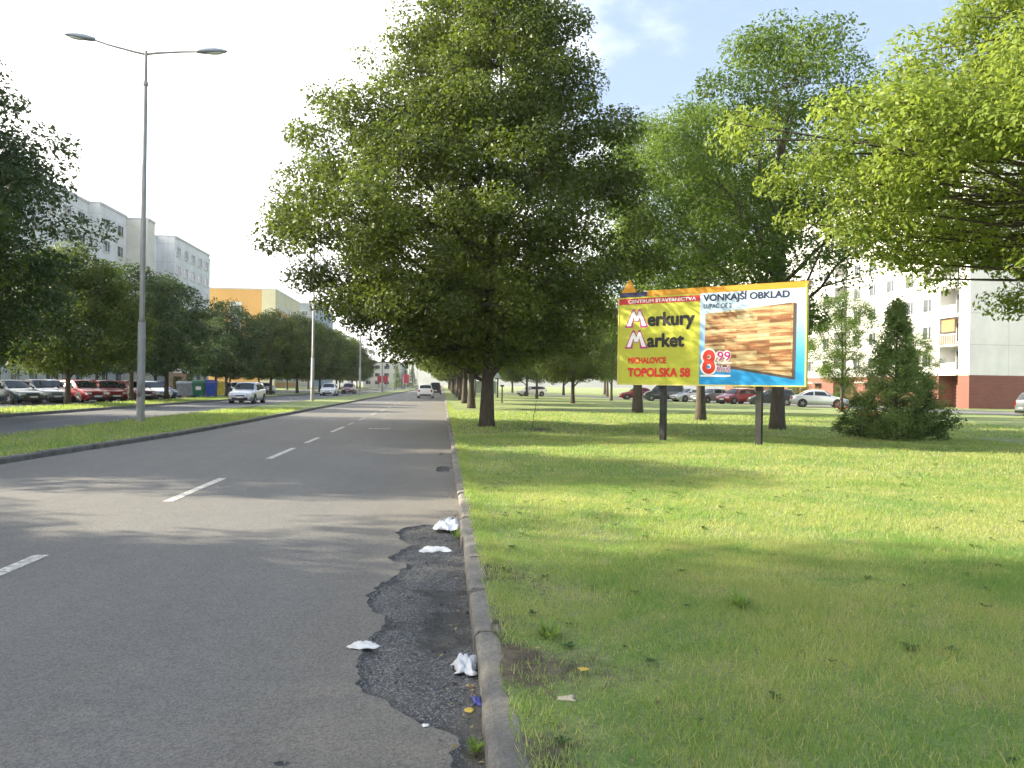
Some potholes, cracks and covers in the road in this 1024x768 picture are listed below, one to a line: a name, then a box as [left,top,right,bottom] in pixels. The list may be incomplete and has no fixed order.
pothole [355,525,486,768]
